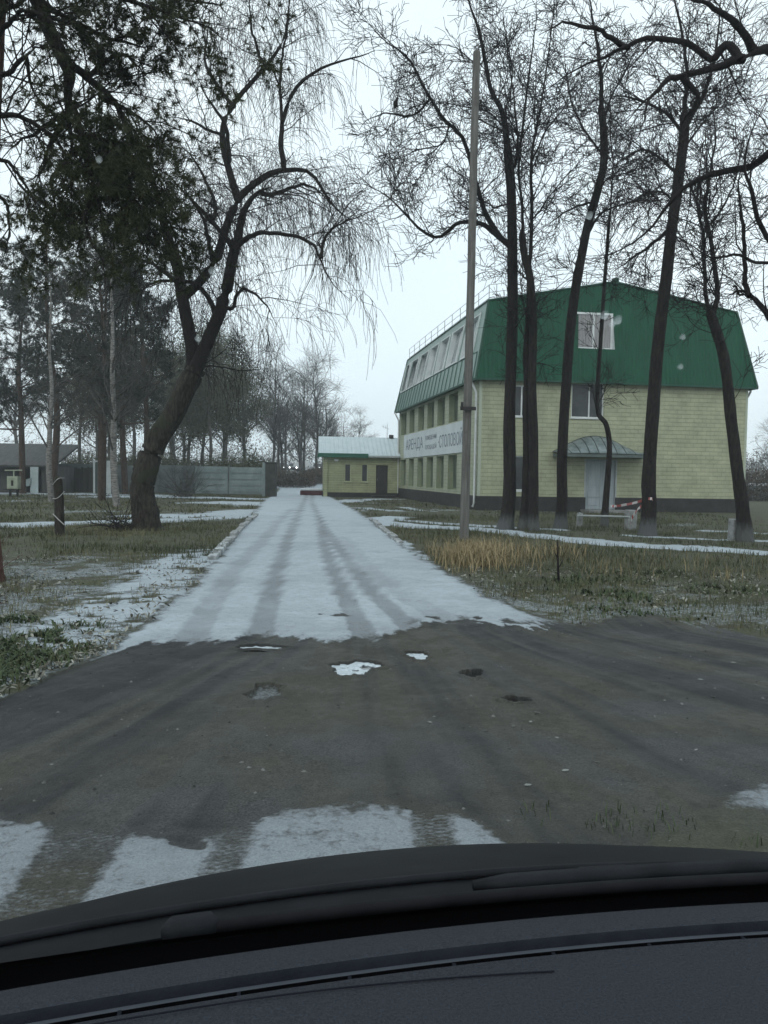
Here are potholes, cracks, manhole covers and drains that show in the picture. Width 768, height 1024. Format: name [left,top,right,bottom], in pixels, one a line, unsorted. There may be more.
pothole [495,694,539,705]
pothole [233,681,292,705]
pothole [452,668,488,681]
pothole [225,643,304,652]
